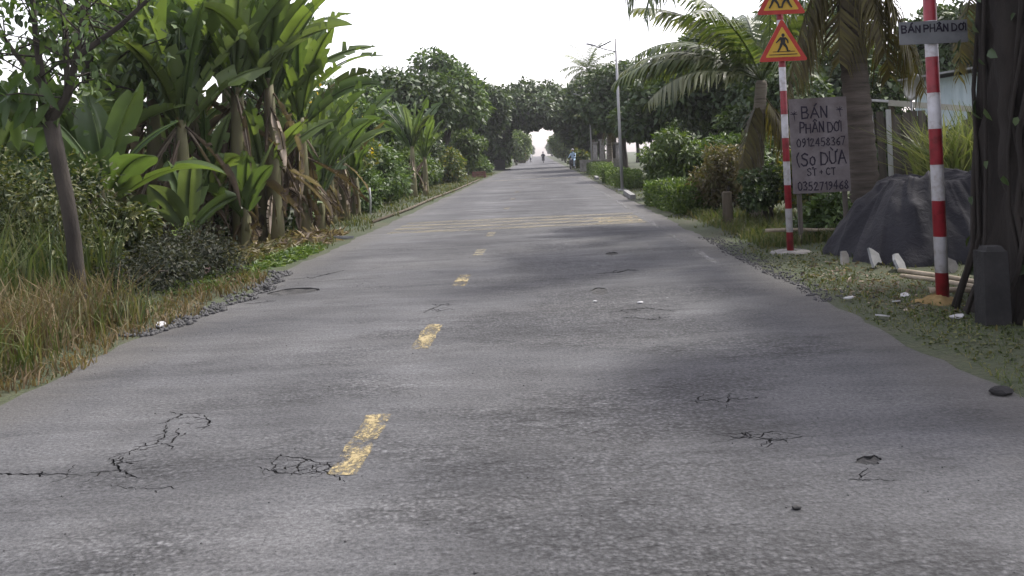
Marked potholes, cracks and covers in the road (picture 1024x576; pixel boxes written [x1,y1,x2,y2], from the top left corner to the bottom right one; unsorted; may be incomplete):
pothole [856,456,882,465]
crack [1,412,211,493]
crack [711,431,802,447]
crack [262,455,341,480]
